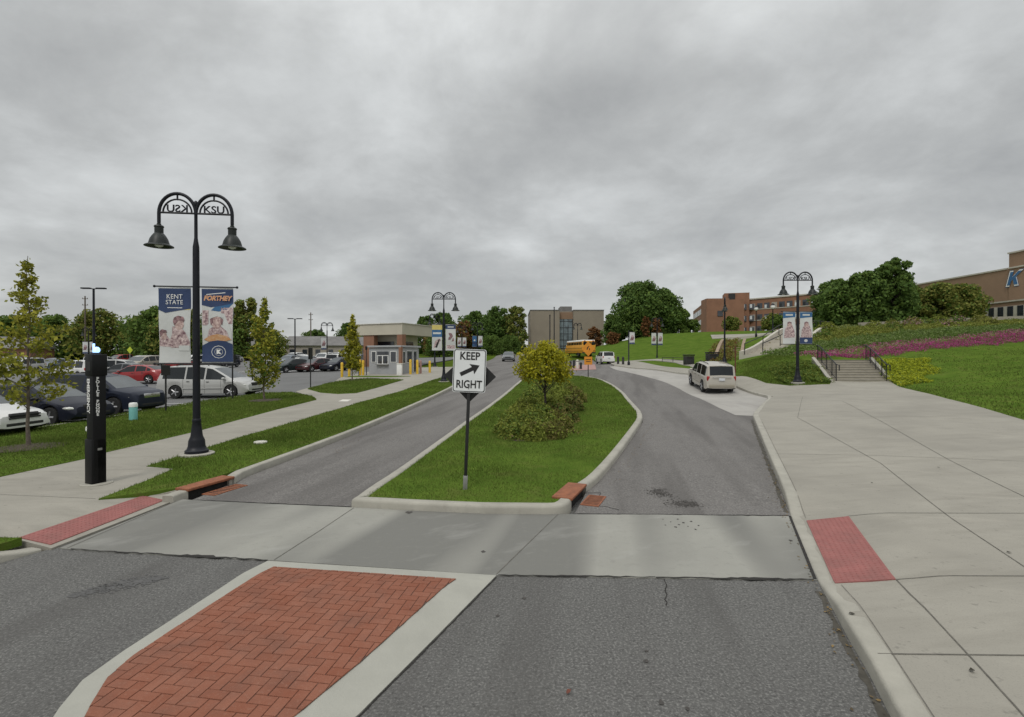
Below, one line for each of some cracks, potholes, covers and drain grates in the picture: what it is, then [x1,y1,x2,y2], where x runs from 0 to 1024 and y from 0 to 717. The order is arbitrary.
drain grate [175,475,235,500]
drain grate [202,484,248,496]
drain grate [580,495,606,507]
